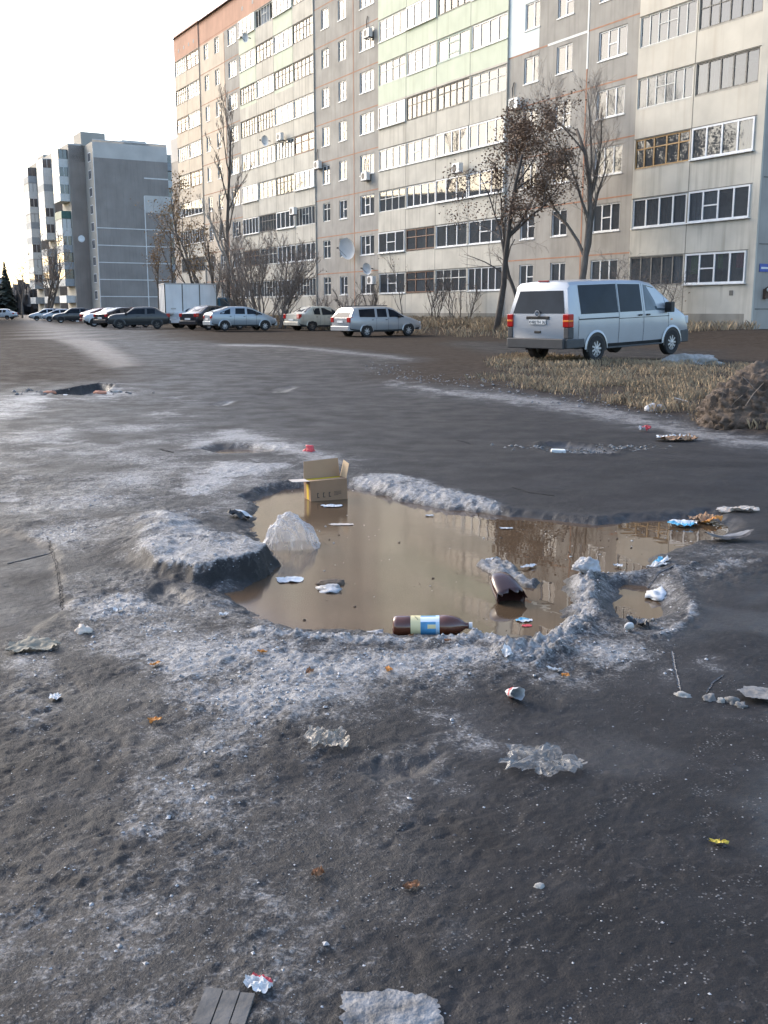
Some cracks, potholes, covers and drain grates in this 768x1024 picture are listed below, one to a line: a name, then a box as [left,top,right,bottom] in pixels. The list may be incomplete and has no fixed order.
pothole [203,443,287,452]
pothole [195,476,748,639]
crack [7,538,64,610]
pothole [47,382,119,396]
pothole [530,440,629,455]
